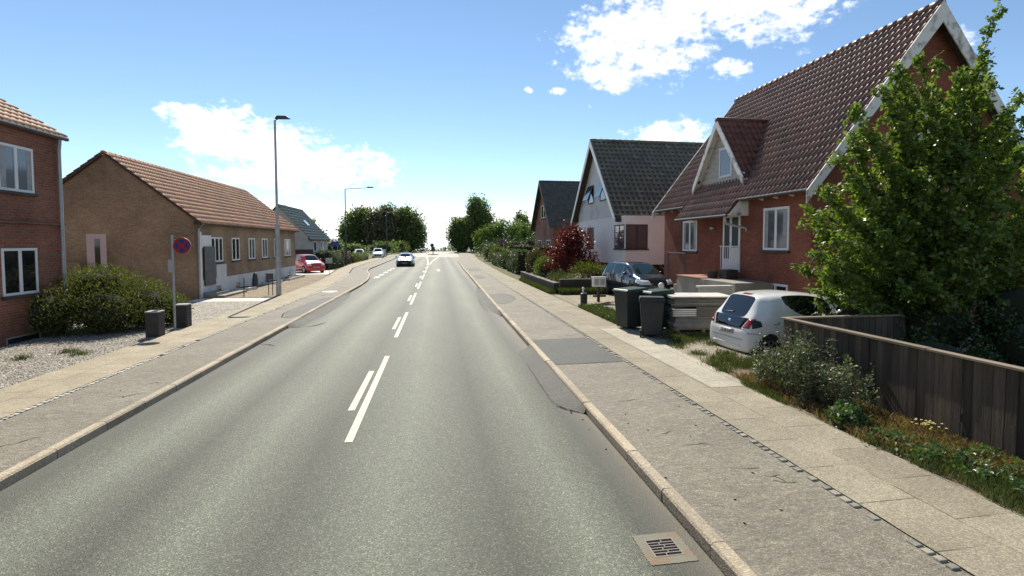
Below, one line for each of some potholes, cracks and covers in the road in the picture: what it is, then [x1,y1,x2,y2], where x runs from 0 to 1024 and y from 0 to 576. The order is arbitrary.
drain grate [632,532,698,566]
